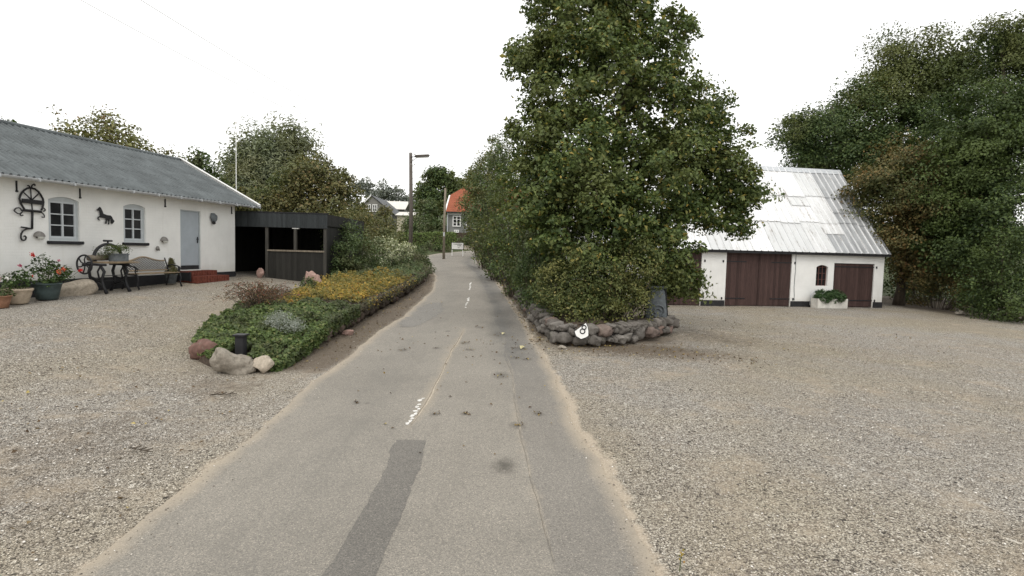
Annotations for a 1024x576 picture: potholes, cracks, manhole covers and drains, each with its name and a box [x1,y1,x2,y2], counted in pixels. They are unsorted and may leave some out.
crack [410,330,464,426]
